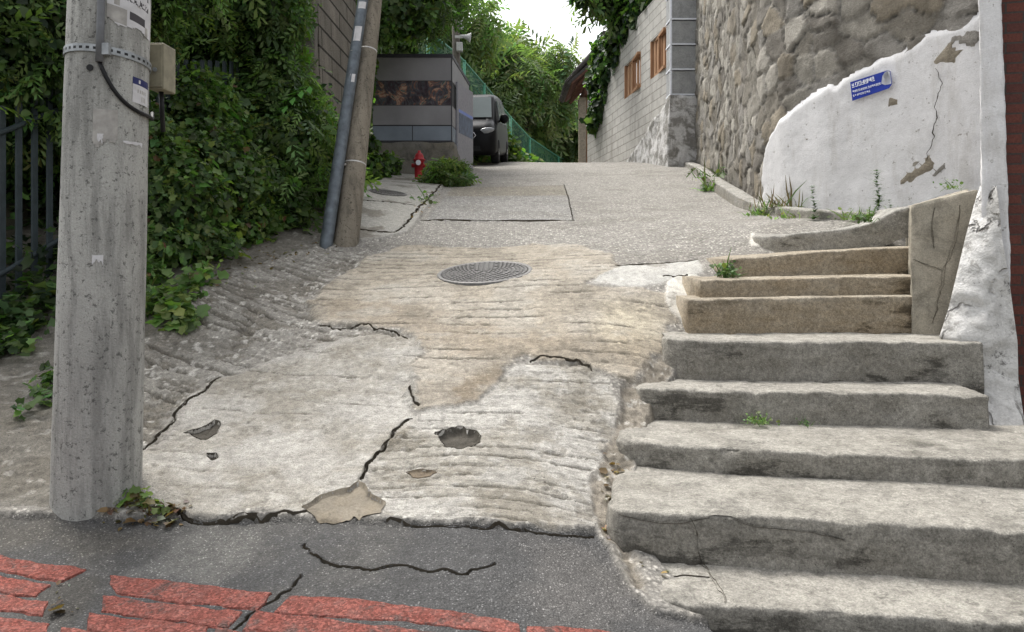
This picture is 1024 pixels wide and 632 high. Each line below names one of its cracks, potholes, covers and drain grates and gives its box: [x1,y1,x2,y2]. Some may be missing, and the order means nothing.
pothole [434,425,481,449]
crack [360,184,575,233]
crack [160,508,307,526]
pothole [183,419,221,440]
crack [143,377,221,450]
crack [318,323,408,339]
crack [530,355,593,372]
crack [232,516,594,630]
crack [360,385,420,480]
manhole cover [437,261,532,286]
pothole [406,469,437,479]
